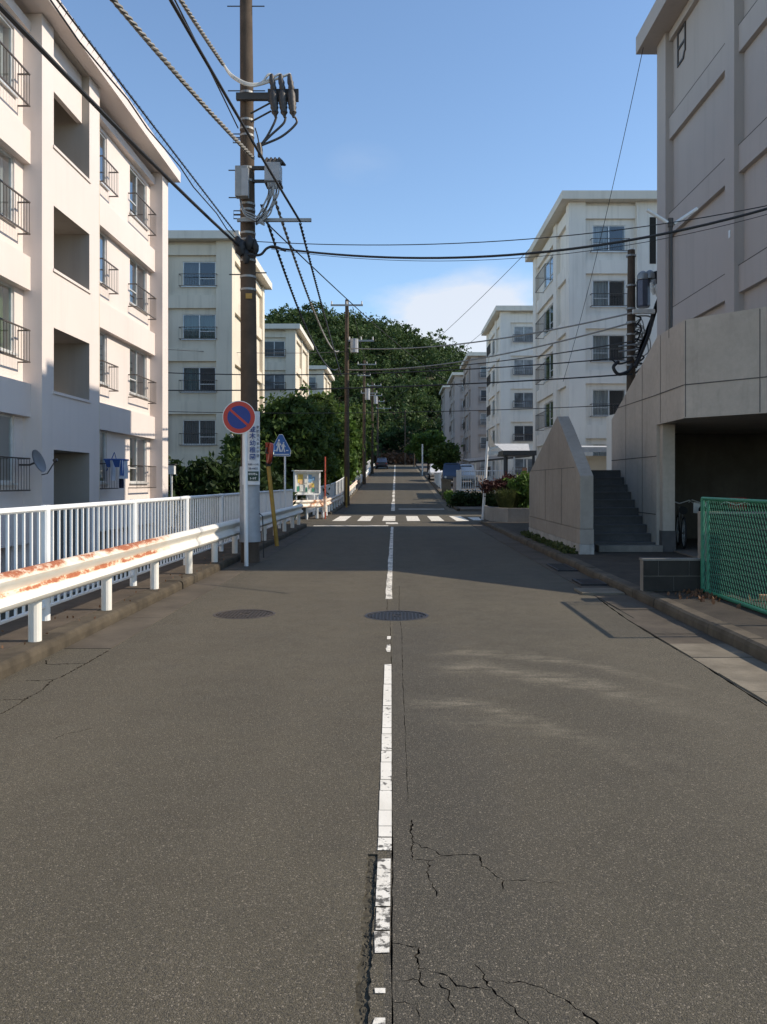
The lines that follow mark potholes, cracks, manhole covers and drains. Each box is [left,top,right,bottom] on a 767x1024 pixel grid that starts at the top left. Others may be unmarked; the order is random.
crack [391,943,599,1024]
pothole [353,854,378,1024]
manhole cover [213,609,275,619]
manhole cover [364,610,429,621]
crack [409,820,552,896]
crack [1,651,108,714]
